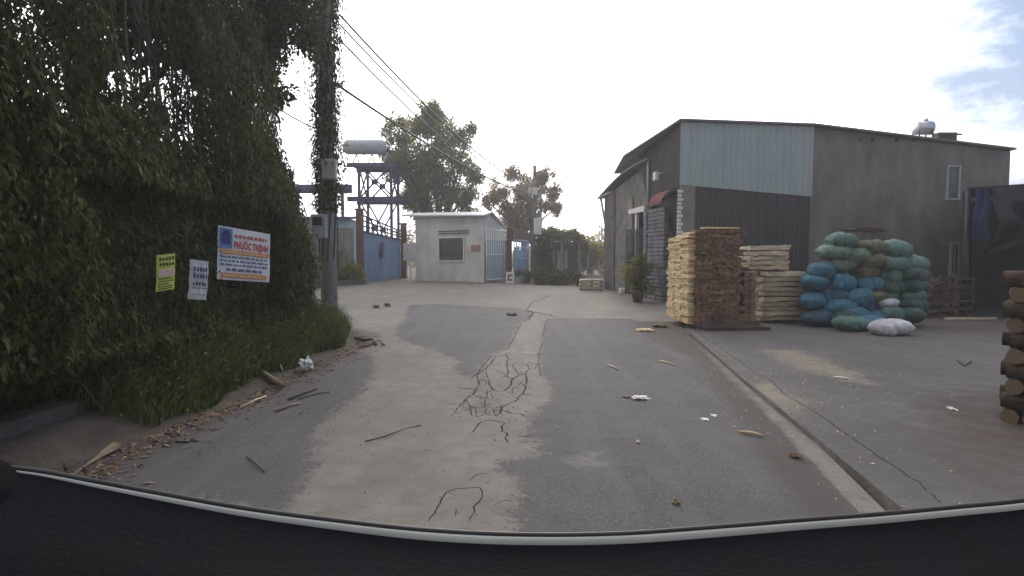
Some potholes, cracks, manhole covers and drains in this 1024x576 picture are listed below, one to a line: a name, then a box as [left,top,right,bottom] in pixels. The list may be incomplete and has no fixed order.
crack [695,331,943,505]
crack [454,295,557,443]
crack [428,473,514,521]
